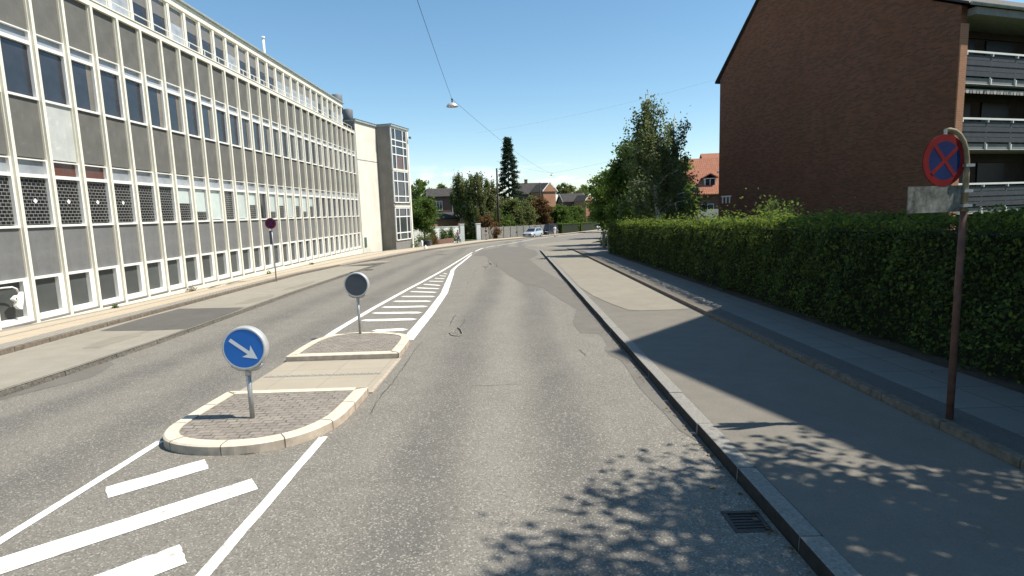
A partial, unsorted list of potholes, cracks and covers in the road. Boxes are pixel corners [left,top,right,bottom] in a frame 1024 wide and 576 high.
drain grate [721,510,773,533]
